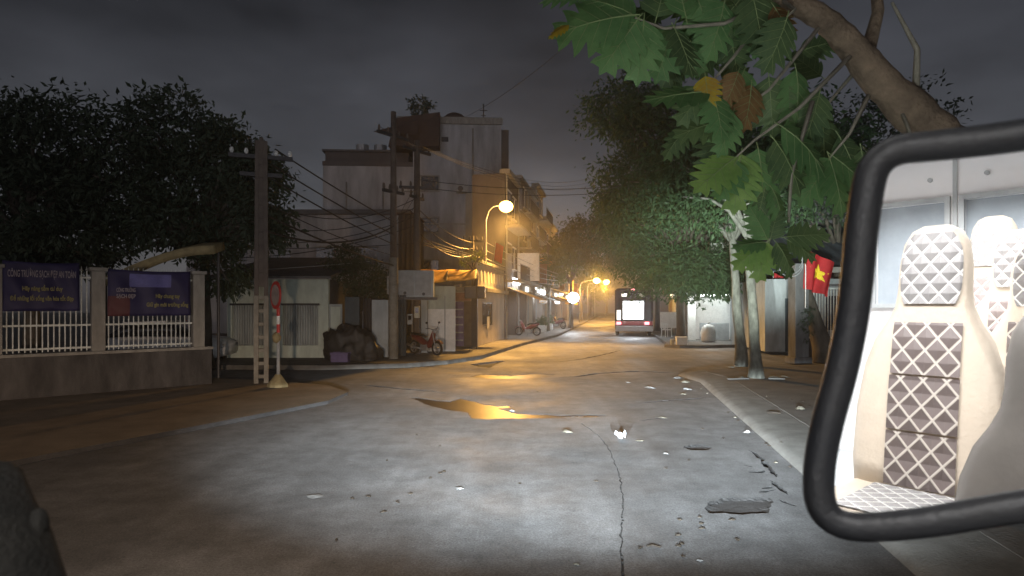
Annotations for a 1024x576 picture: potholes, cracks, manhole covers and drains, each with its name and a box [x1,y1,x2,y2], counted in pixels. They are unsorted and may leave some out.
crack [745,450,795,506]
crack [560,350,670,378]
pothole [413,398,605,419]
crack [581,397,705,576]
pothole [705,497,773,515]
